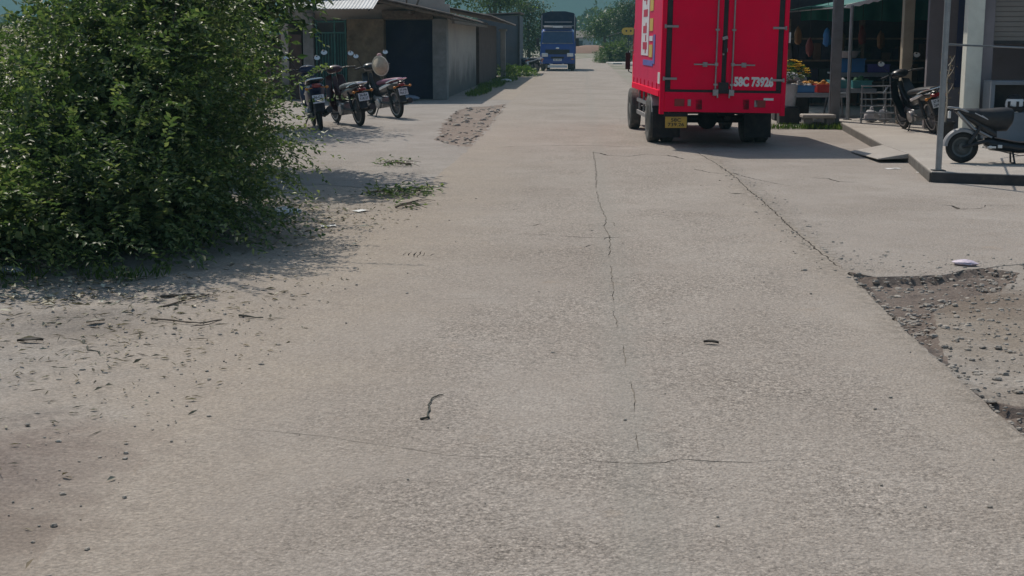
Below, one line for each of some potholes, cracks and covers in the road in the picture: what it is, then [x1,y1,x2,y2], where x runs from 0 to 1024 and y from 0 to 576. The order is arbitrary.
crack [471,145,837,464]
pothole [848,268,1019,365]
pothole [974,392,1024,435]
